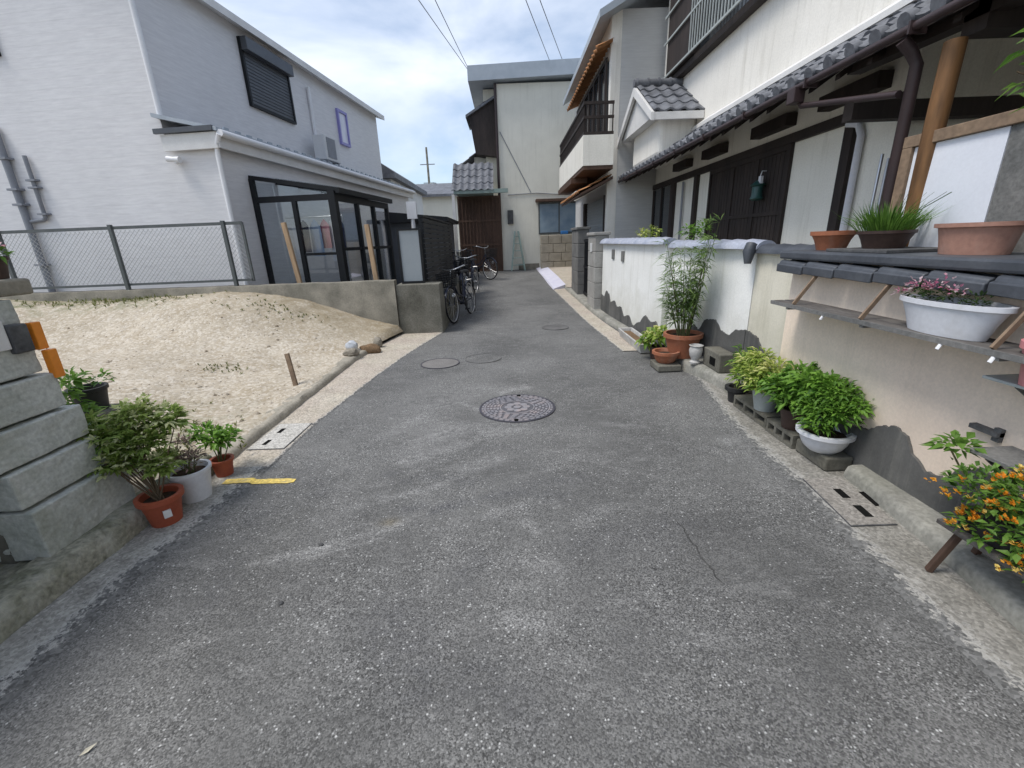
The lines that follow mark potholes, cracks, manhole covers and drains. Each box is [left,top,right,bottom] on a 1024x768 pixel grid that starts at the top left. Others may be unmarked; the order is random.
crack [676,520,724,584]
manhole cover [465,353,502,364]
manhole cover [421,358,460,369]
manhole cover [479,394,555,423]
